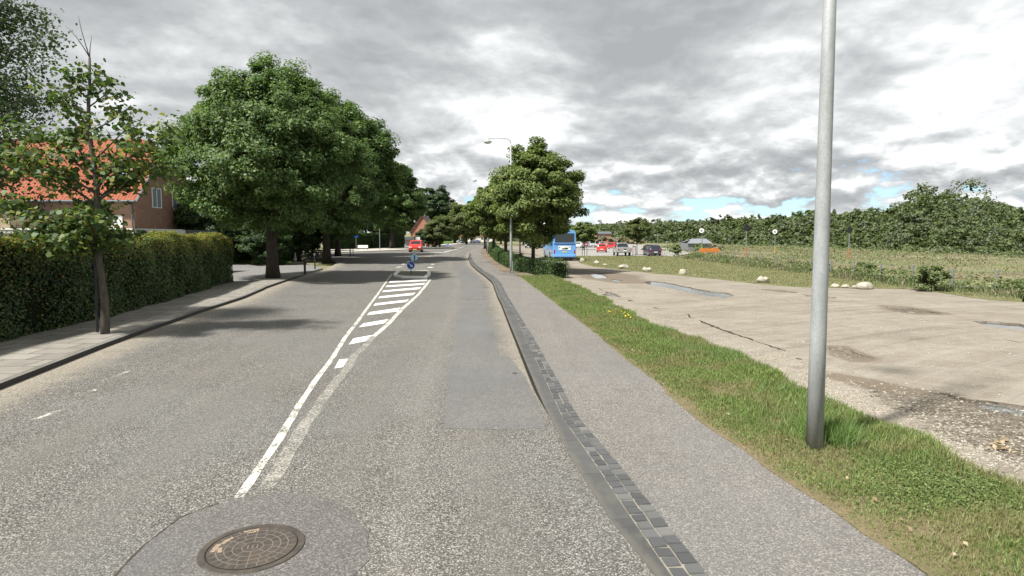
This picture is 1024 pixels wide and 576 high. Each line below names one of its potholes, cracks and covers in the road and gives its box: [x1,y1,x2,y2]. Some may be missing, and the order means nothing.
pothole [973,321,1024,330]
manhole cover [196,524,306,575]
pothole [643,281,734,298]
crack [687,314,802,360]
pothole [942,393,1024,415]
pothole [829,347,875,359]
